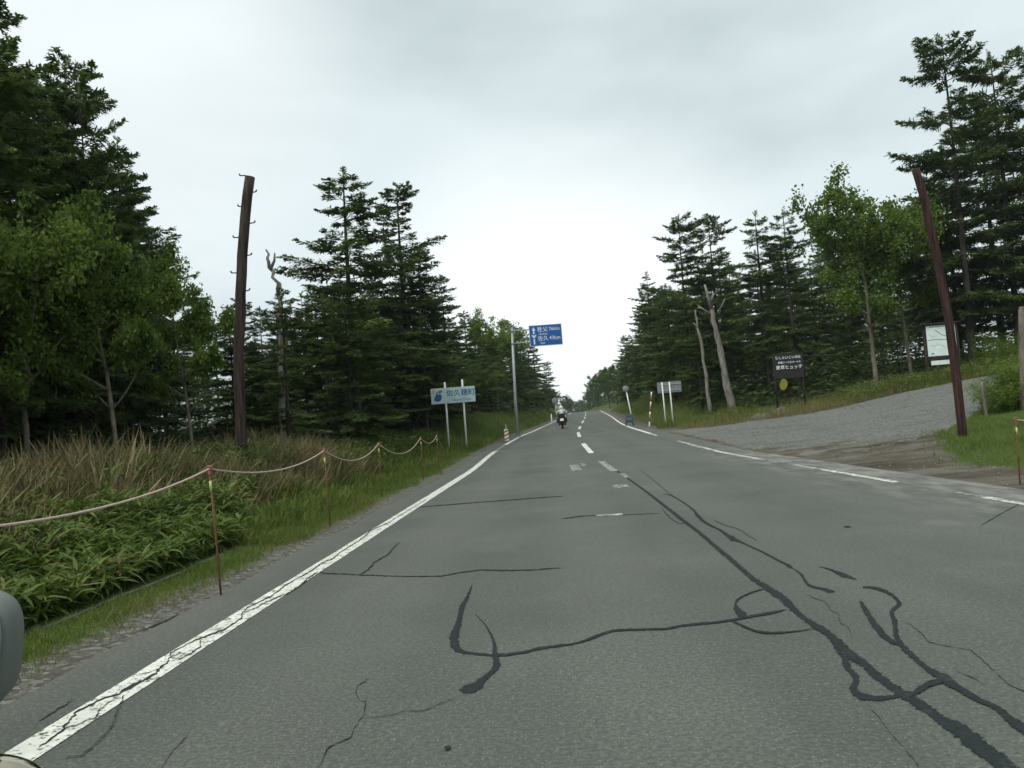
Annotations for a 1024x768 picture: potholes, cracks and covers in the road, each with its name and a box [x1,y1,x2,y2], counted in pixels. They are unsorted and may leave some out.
crack [39,500,552,759]
